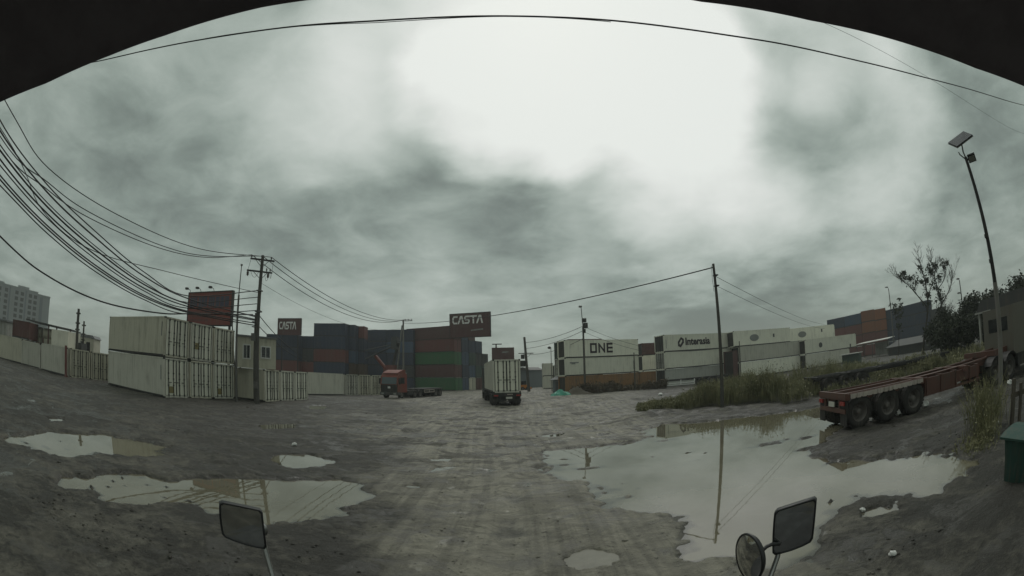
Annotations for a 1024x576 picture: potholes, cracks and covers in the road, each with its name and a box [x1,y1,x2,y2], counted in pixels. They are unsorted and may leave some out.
pothole [0,425,189,462]
pothole [253,449,351,472]
pothole [25,464,398,535]
pothole [516,404,1005,576]
